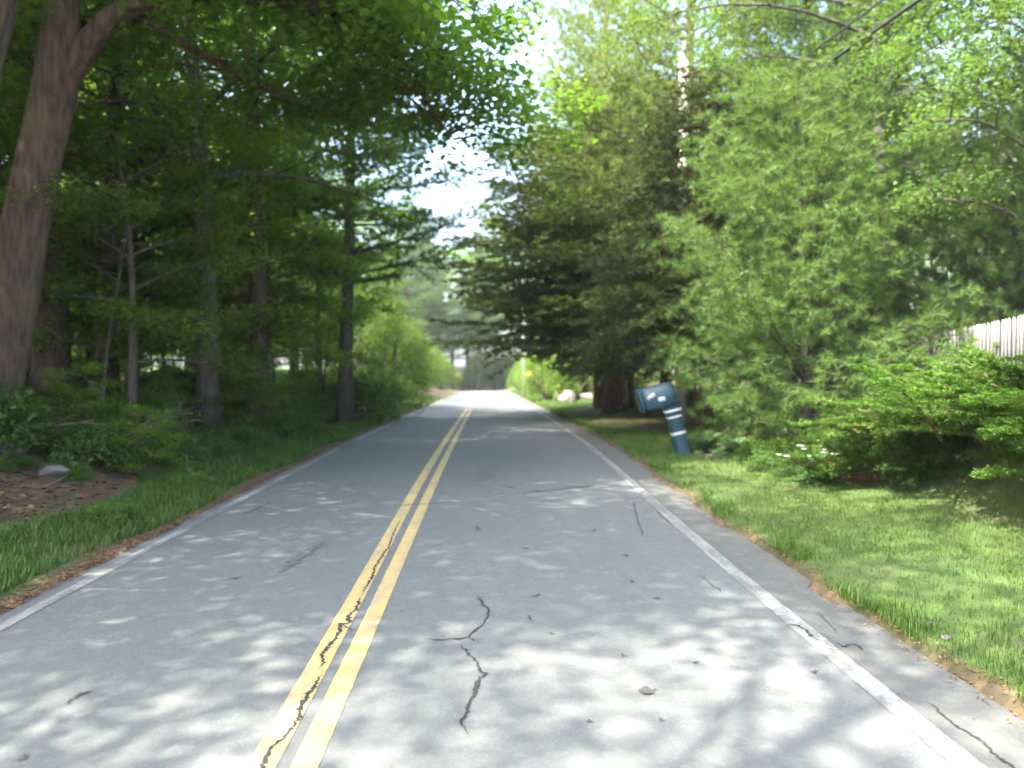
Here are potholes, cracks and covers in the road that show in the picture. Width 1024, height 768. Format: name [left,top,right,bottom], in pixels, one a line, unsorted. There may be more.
crack [788,612,863,650]
crack [427,596,490,735]
crack [259,521,400,768]
crack [633,502,669,535]
